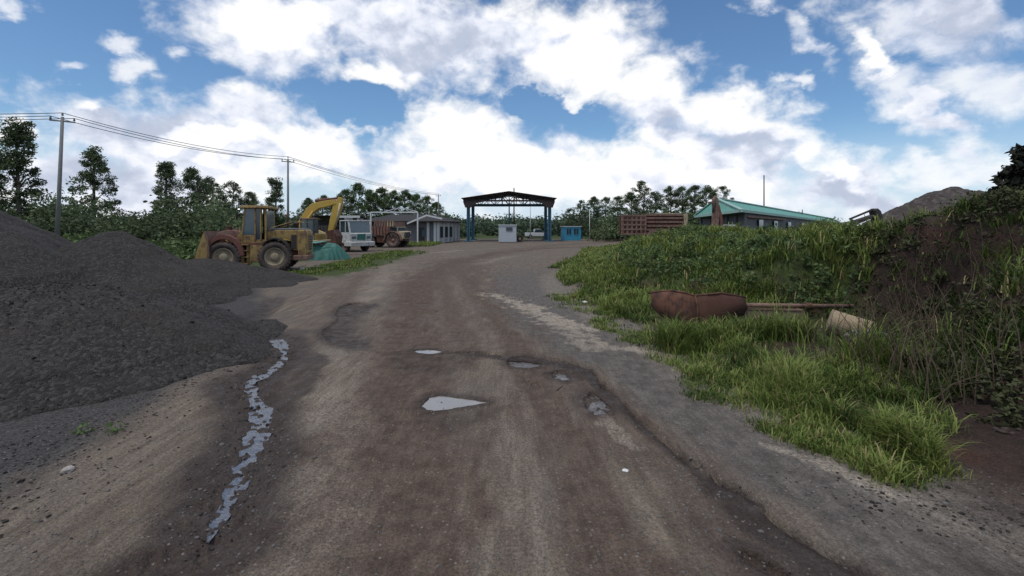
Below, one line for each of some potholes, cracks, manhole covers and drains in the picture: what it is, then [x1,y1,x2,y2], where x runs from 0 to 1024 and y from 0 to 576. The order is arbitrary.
pothole [574,389,623,419]
pothole [413,393,496,414]
pothole [408,348,448,356]
pothole [500,356,549,370]
